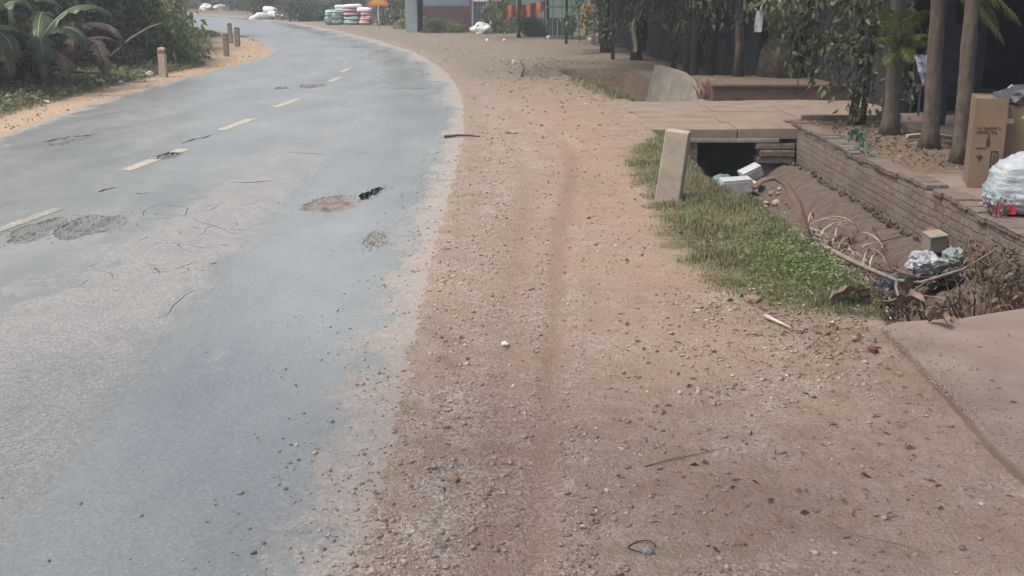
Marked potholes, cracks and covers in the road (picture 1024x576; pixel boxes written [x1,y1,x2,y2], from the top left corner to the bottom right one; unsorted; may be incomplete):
crack [47,187,279,291]
pothole [156,152,183,160]
pothole [361,231,388,249]
pothole [299,195,355,212]
pothole [359,187,383,200]
